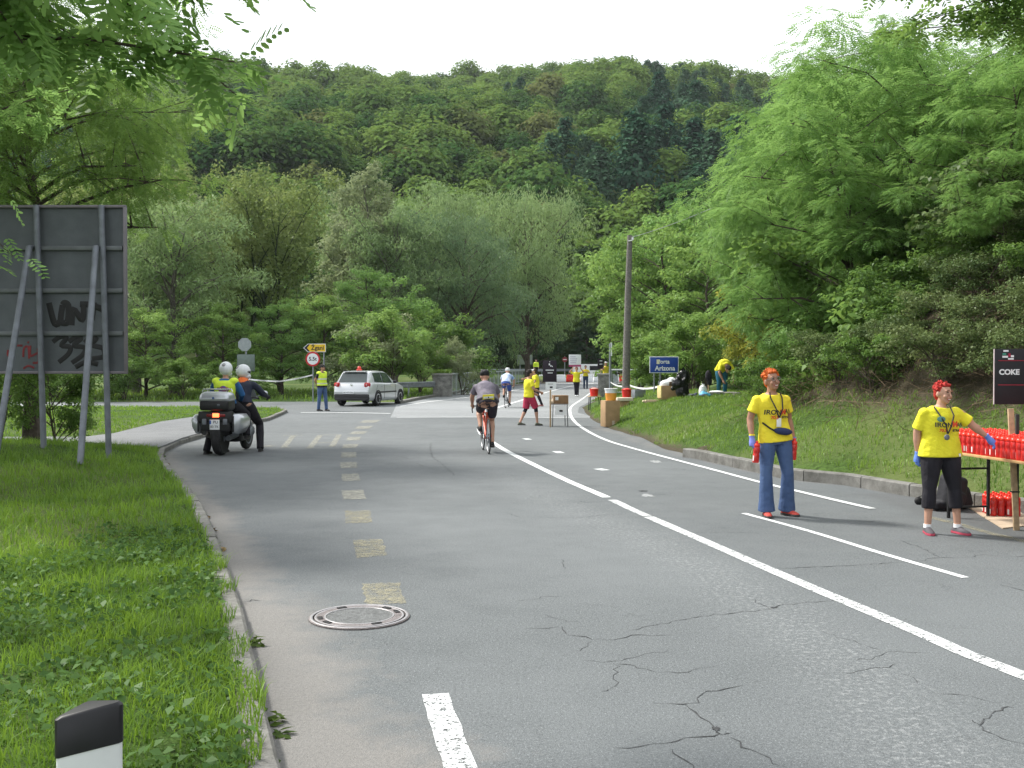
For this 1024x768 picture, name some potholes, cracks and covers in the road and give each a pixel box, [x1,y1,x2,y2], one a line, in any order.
manhole cover [308,604,410,631]
crack [519,596,840,691]
crack [939,693,1024,744]
crack [822,631,920,681]
crack [617,685,783,768]
